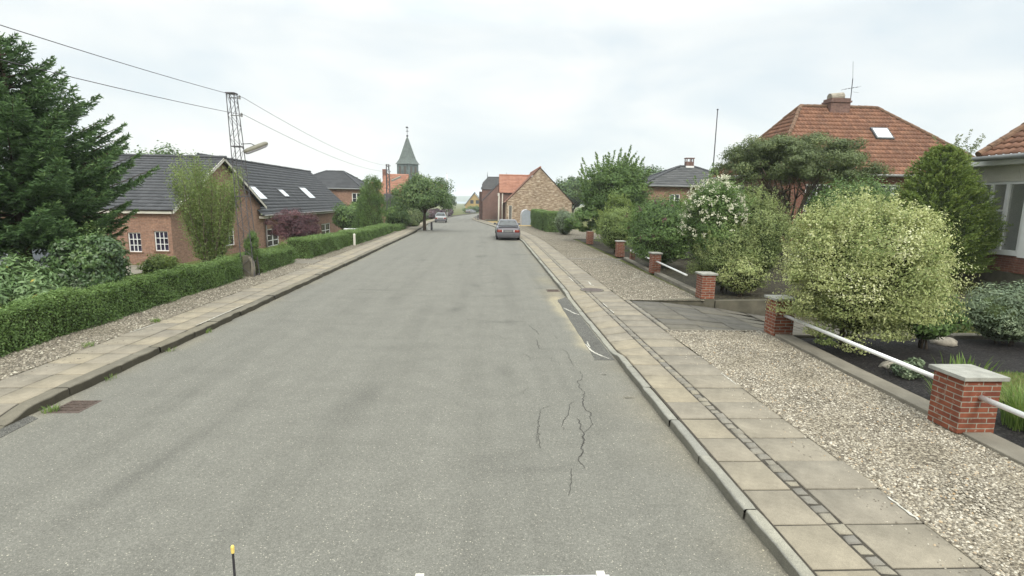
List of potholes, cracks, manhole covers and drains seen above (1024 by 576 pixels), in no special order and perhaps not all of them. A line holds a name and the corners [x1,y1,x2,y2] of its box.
crack [465,317,593,495]
drain grate [47,400,102,413]
